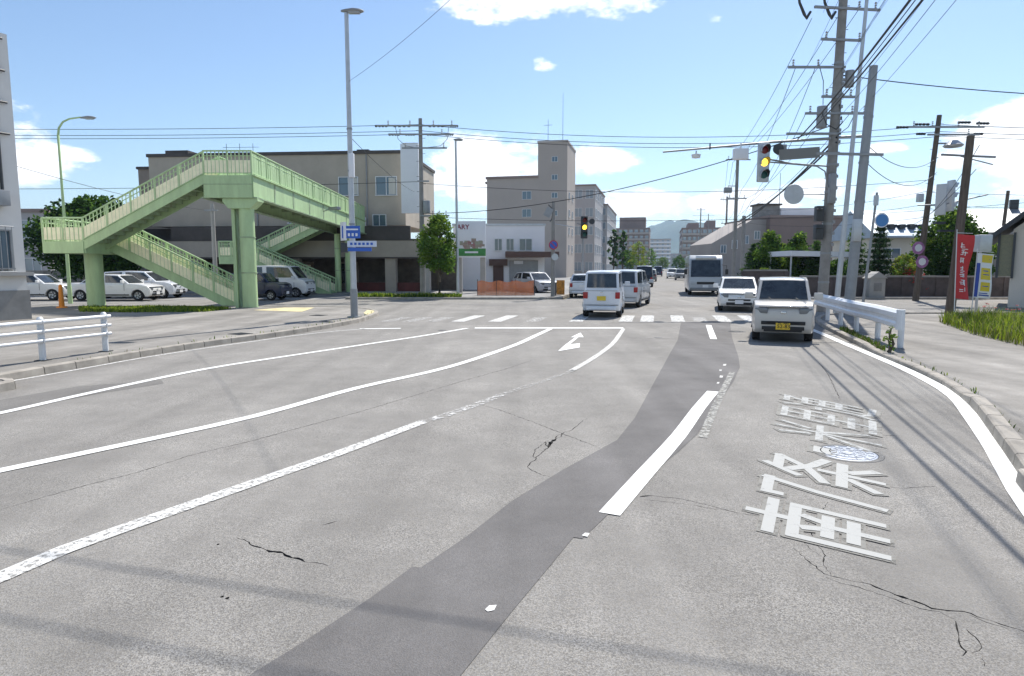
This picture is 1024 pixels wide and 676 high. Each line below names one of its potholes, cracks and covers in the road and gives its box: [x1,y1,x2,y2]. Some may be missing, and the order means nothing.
crack [640,495,1024,666]
crack [238,538,328,566]
crack [491,407,594,476]
manhole cover [815,444,885,463]
